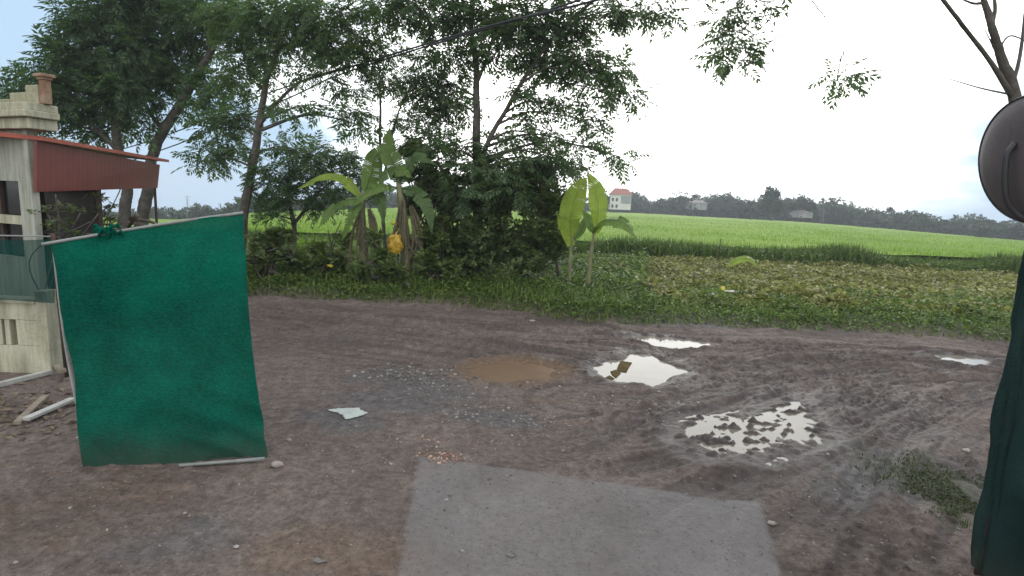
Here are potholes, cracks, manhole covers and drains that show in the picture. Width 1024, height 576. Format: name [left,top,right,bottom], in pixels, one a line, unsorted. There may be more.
pothole [652,386,850,470]
pothole [919,348,994,366]
pothole [451,354,577,385]
pothole [615,331,724,349]
pothole [581,345,704,390]
